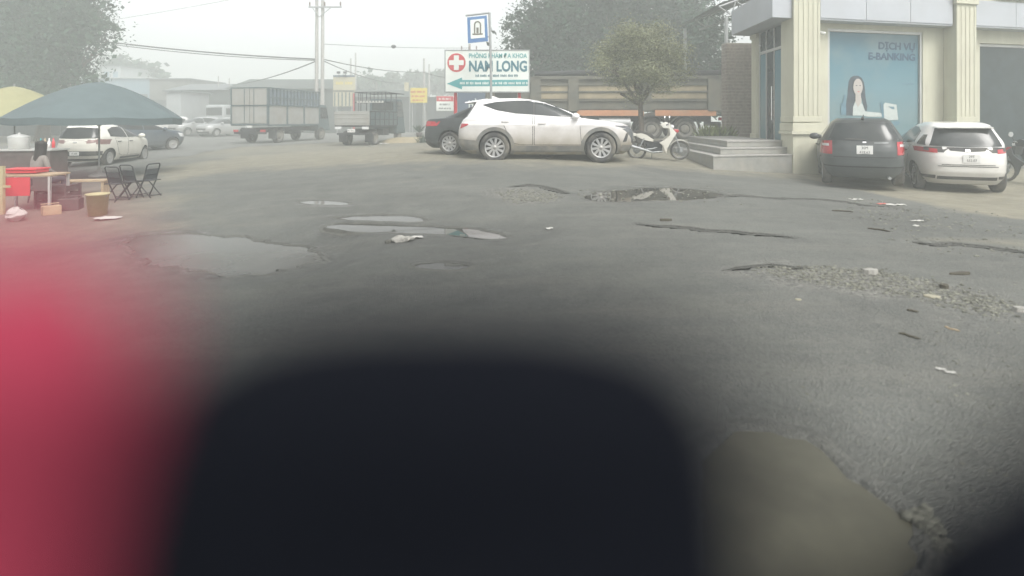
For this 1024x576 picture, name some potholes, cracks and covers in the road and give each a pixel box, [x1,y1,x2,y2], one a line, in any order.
pothole [405,260,478,271]
pothole [578,187,730,203]
pothole [326,213,431,223]
crack [913,242,1024,254]
pothole [319,221,514,240]
crack [636,224,793,238]
pothole [116,232,332,278]
pothole [770,418,908,576]
